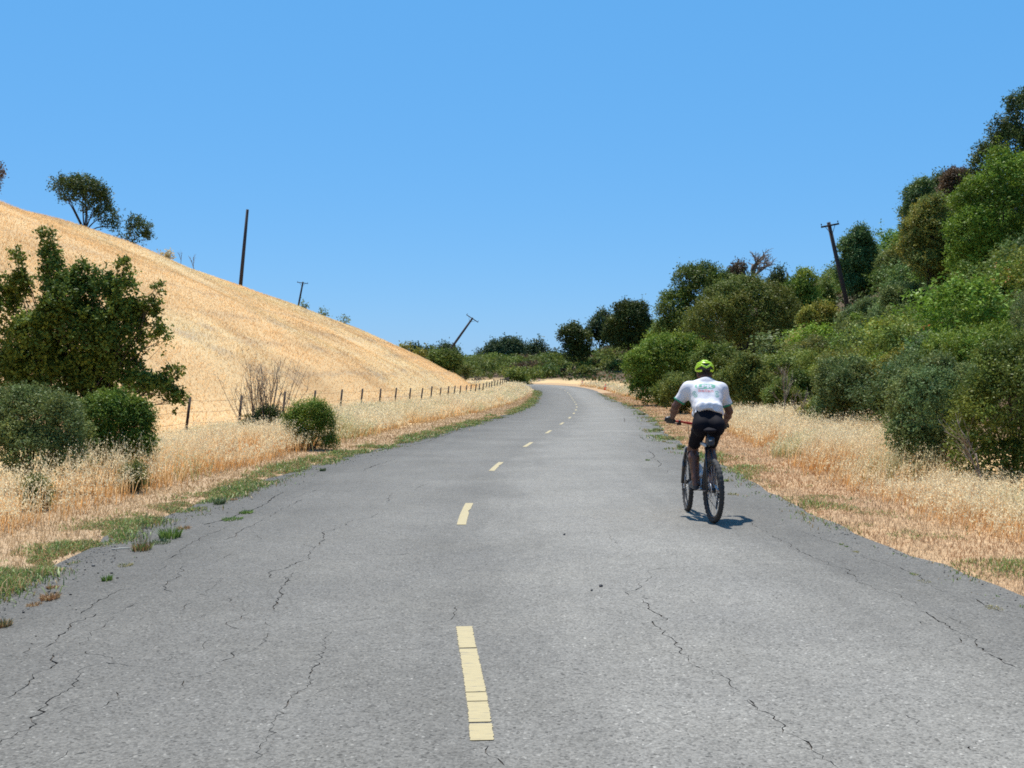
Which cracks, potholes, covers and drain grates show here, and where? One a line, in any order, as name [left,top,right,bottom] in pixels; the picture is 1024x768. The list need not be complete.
crack [752,523,949,603]
crack [255,618,374,760]
crack [156,490,393,646]
crack [625,564,837,767]
crack [919,597,1023,667]
crack [0,589,150,743]
